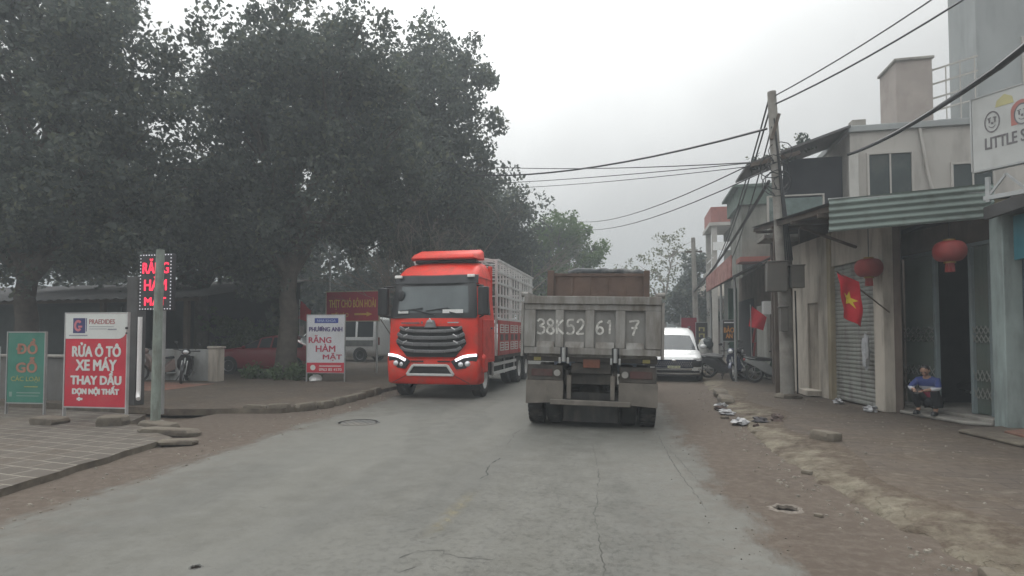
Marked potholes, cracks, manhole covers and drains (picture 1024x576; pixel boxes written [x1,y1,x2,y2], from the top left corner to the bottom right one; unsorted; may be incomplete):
crack [399,550,493,572]
crack [593,447,606,576]
pothole [766,503,804,514]
